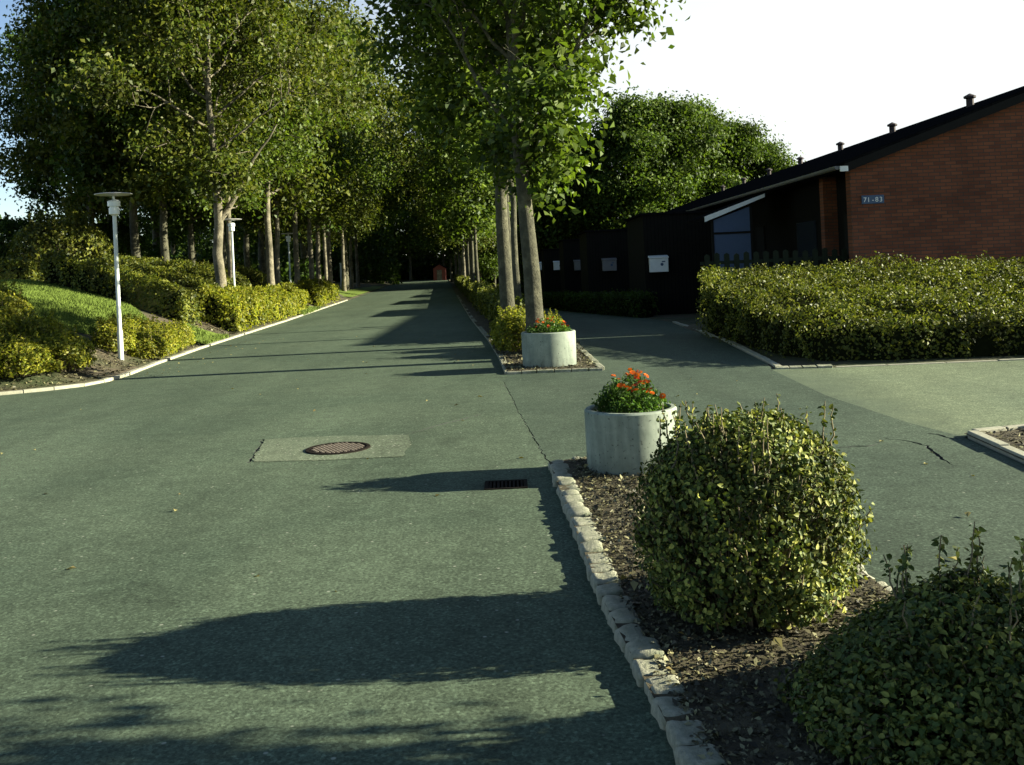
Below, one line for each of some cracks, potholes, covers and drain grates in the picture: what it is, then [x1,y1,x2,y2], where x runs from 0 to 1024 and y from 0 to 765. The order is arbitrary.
drain grate [484,479,528,490]
crack [836,433,957,467]
manhole cover [305,442,371,455]
